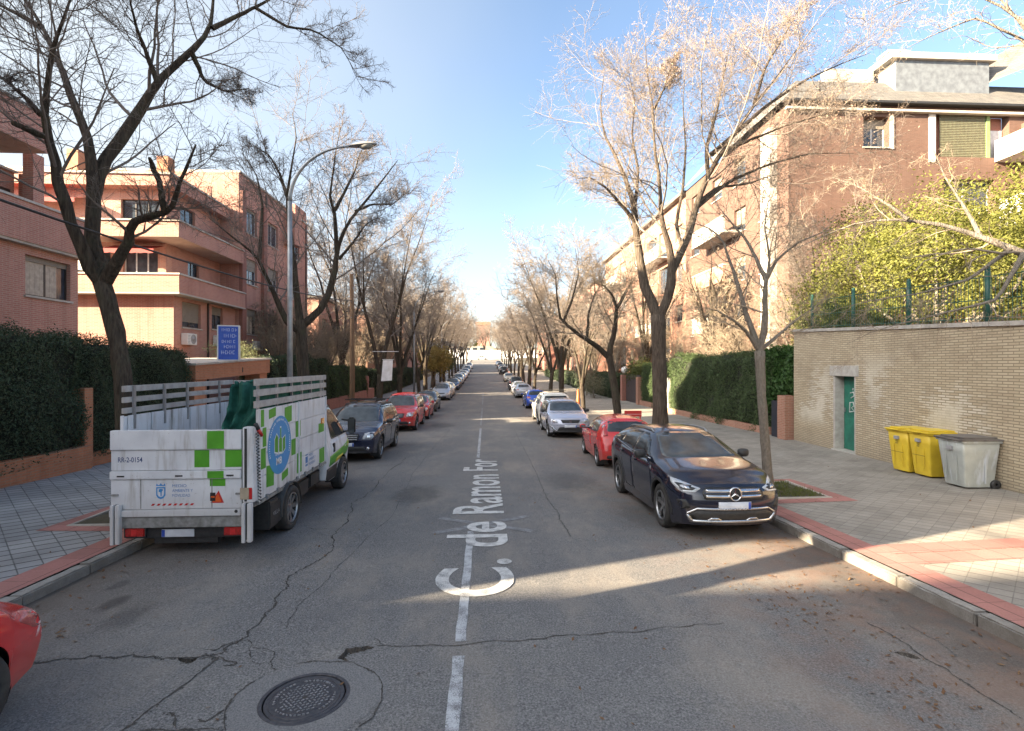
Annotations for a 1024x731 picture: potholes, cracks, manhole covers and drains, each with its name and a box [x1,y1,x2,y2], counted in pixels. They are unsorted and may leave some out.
crack [374,623,721,647]
crack [34,465,397,731]
manhole cover [226,658,389,731]
